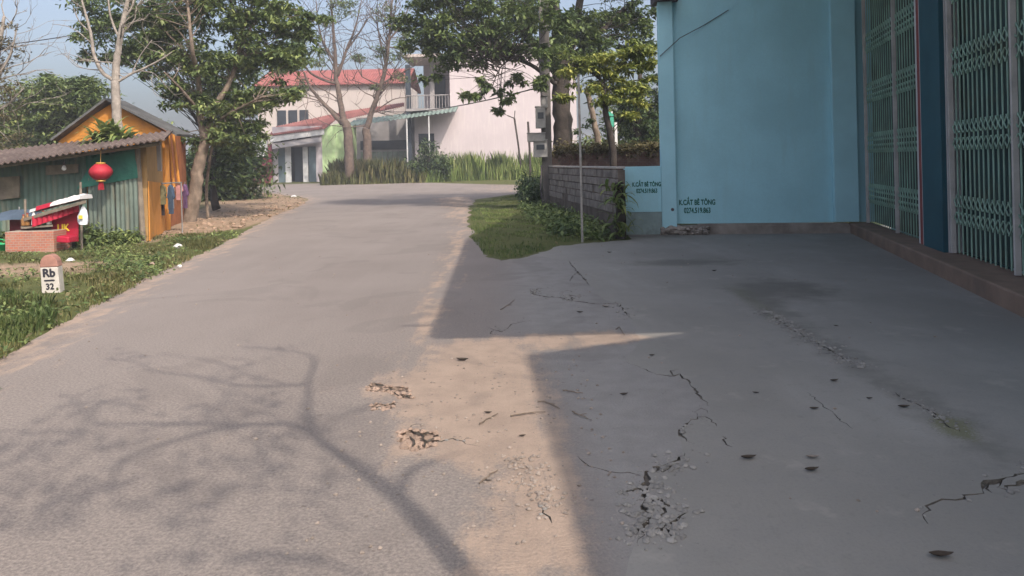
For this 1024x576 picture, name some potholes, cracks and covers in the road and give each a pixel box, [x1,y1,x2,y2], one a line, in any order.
pothole [365,382,416,399]
crack [904,460,1024,525]
pothole [369,401,396,411]
crack [579,365,731,556]
crack [537,502,552,523]
crack [530,260,640,317]
pothole [395,424,449,452]
